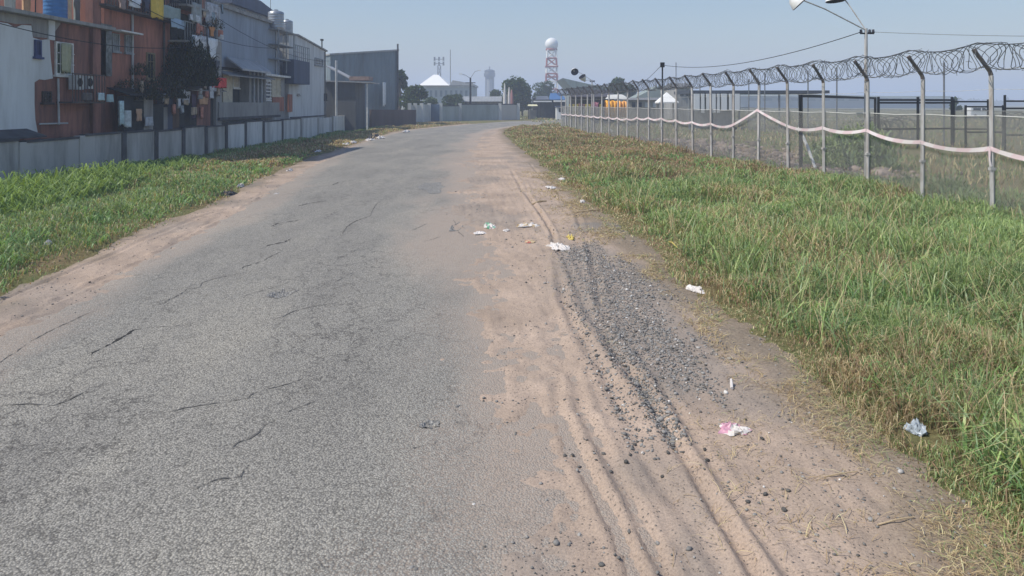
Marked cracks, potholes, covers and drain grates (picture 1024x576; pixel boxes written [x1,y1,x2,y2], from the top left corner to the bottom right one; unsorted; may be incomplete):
crack [168,378,302,412]
crack [164,182,338,303]
crack [1,386,98,406]
crack [229,401,314,449]
crack [91,324,183,355]
